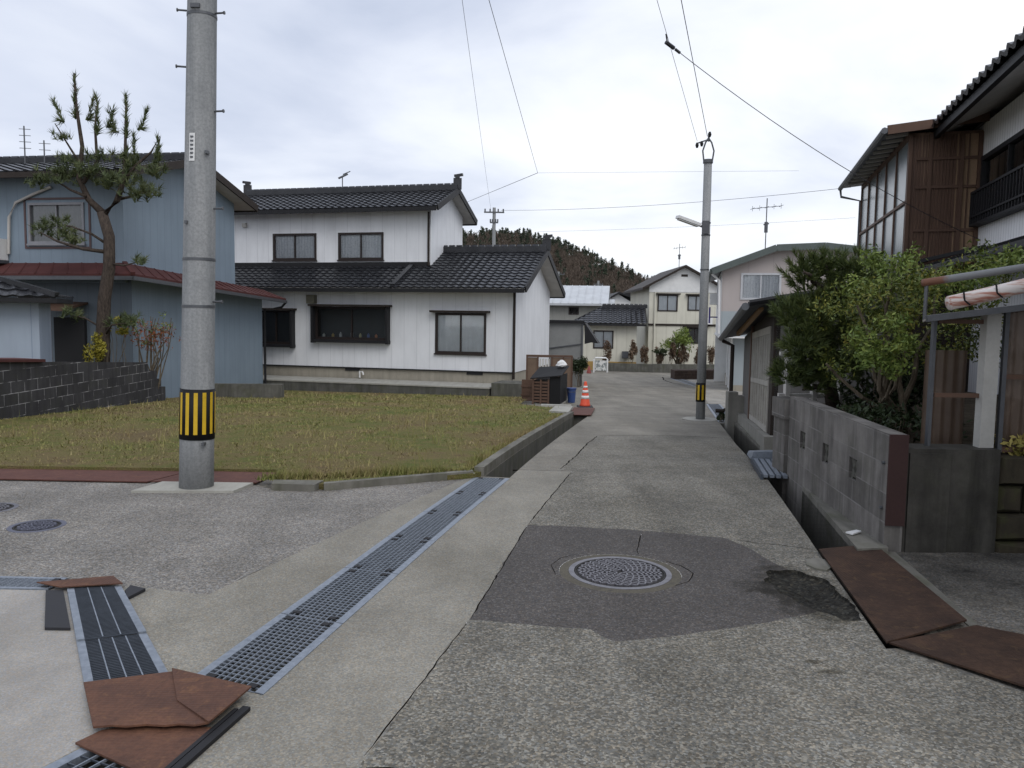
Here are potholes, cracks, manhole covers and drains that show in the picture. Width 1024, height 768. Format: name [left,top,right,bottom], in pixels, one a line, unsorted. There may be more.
pothole [764,570,862,621]
manhole cover [0,502,22,513]
drain grate [77,633,168,682]
drain grate [345,537,435,574]
manhole cover [3,519,70,534]
drain grate [453,477,510,494]
drain grate [281,568,398,624]
manhole cover [559,554,682,593]
drain grate [423,492,490,515]
drain grate [67,586,146,643]
drain grate [197,613,342,695]
drain grate [387,512,466,542]
